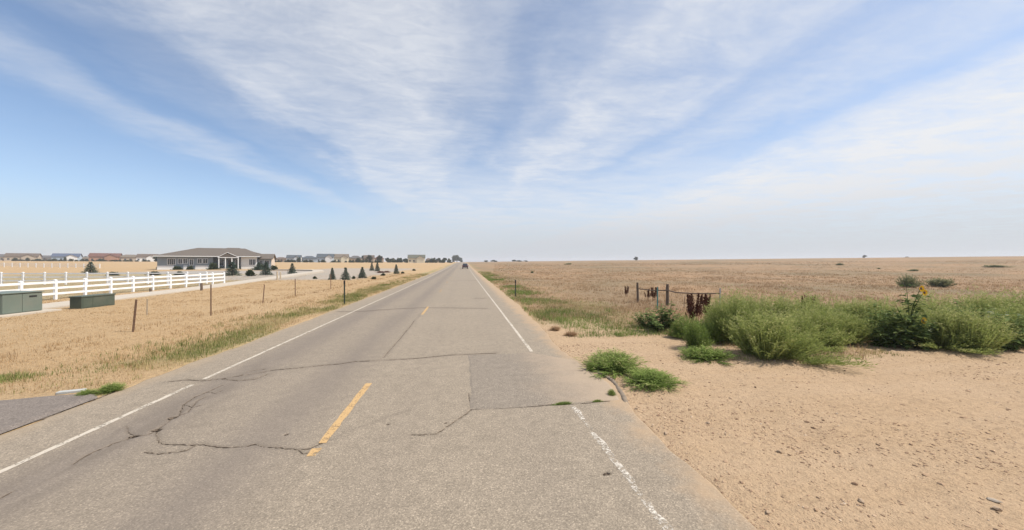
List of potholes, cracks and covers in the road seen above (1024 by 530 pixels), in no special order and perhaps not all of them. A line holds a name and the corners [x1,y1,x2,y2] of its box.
crack [421,400,607,435]
crack [0,353,493,499]
